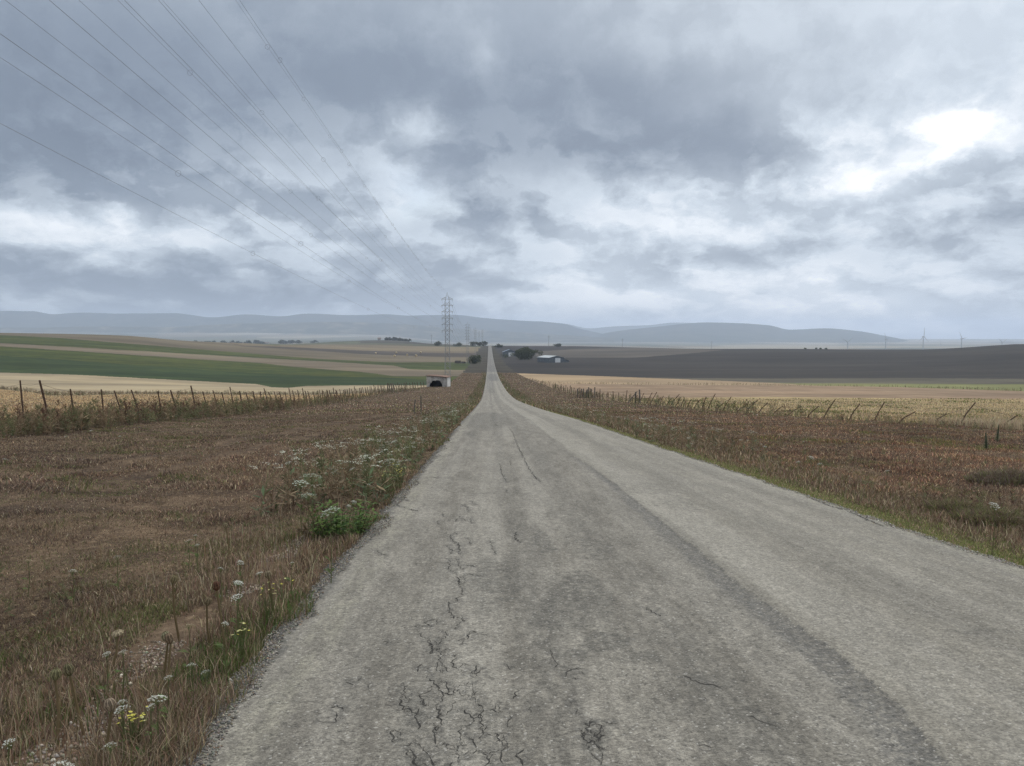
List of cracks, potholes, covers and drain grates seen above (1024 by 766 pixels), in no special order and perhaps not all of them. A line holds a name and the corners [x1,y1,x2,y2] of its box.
crack [390,503,524,766]
crack [574,708,614,765]
